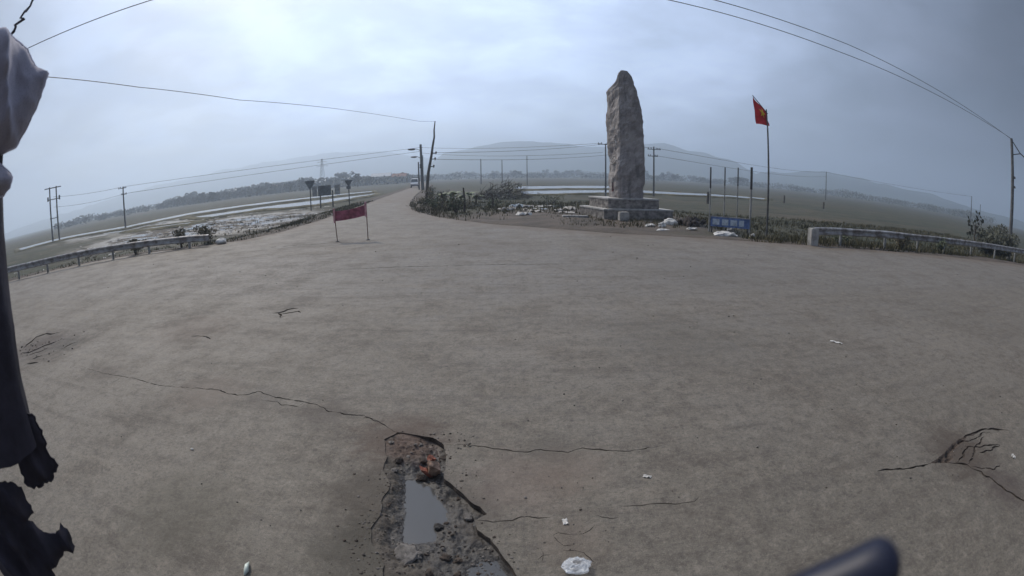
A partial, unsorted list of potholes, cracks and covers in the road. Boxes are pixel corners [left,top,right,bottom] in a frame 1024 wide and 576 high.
crack [481,498,698,563]
crack [86,368,399,434]
crack [879,428,1024,501]
crack [25,333,73,364]
crack [446,444,657,453]
pothole [371,432,516,576]
